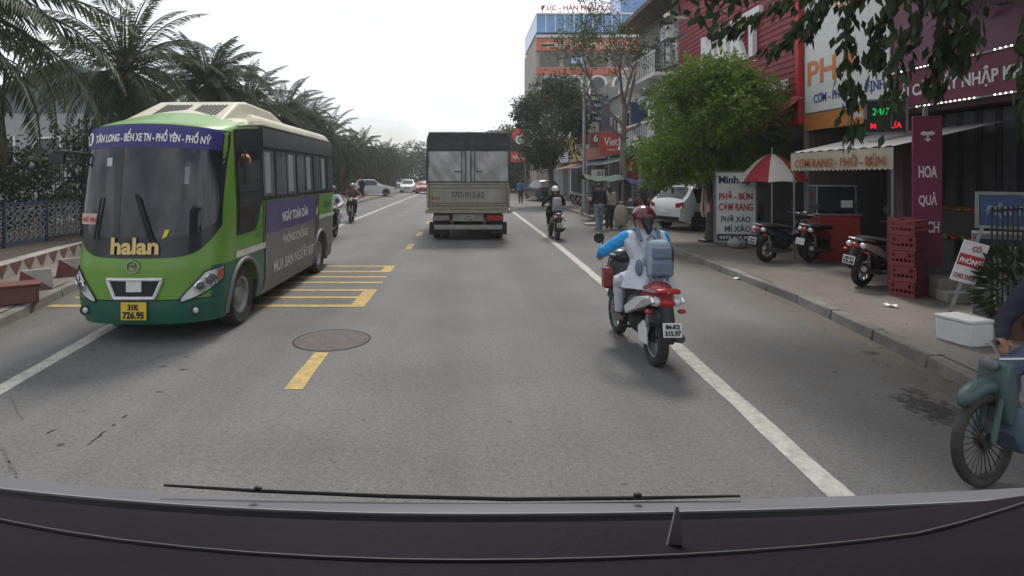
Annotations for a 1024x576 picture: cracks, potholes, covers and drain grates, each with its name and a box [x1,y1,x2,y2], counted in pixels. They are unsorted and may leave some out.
manhole cover [292,329,371,352]
crack [0,448,19,478]
